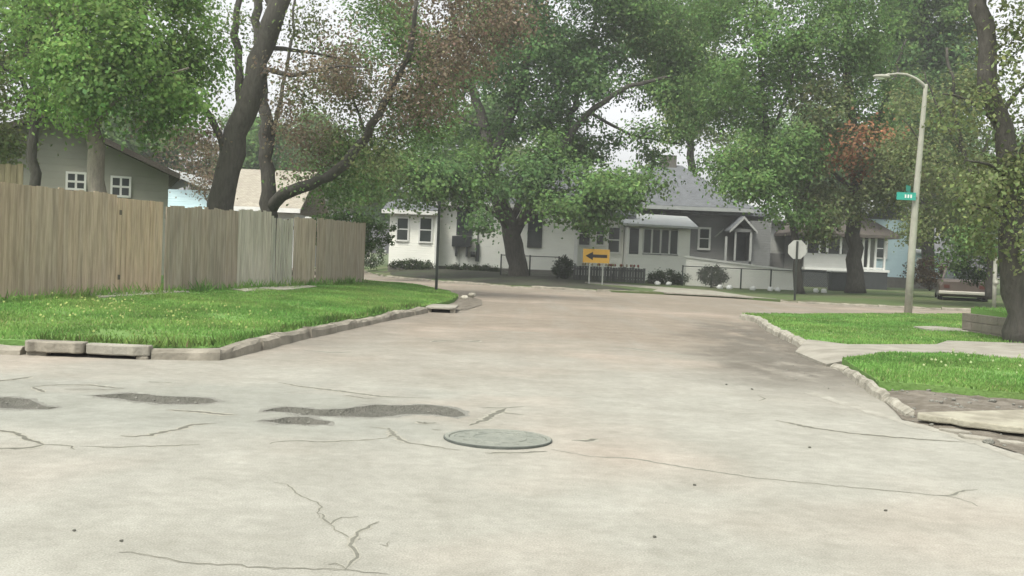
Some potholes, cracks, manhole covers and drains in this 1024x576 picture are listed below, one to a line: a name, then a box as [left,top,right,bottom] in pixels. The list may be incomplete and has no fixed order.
crack [269,406,524,450]
manhole cover [444,429,552,450]
crack [485,439,978,506]
drain grate [426,304,459,313]
pothole [256,416,335,426]
crack [0,409,235,450]
pothole [258,404,471,419]
pothole [0,396,63,411]
crack [129,482,390,574]
pothole [82,392,225,405]
crack [277,382,424,399]
crack [775,420,961,442]
